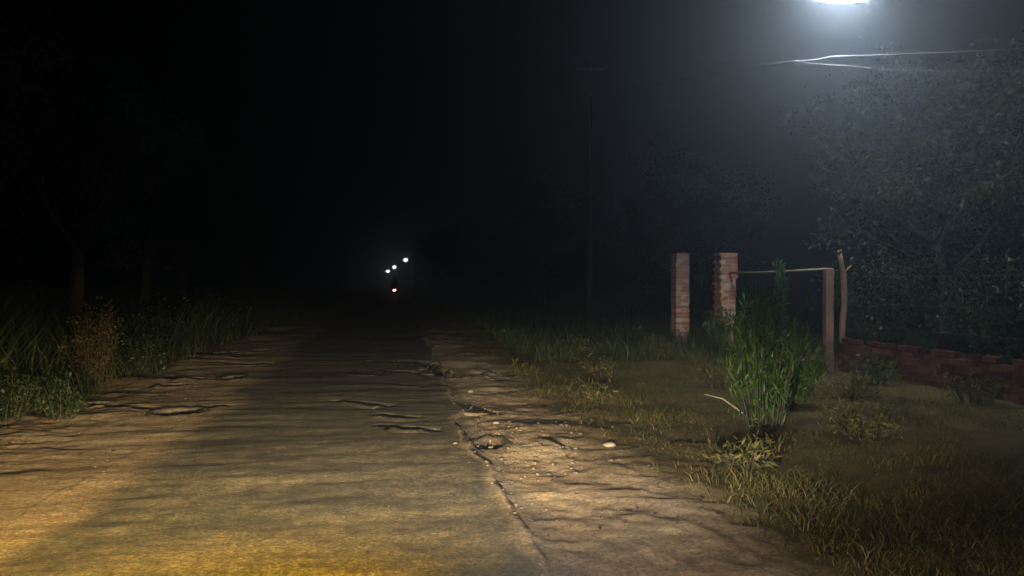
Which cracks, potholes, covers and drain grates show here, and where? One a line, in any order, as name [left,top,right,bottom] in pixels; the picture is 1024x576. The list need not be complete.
pothole [462,435,513,453]
pothole [145,406,211,419]
crack [83,349,280,413]
pothole [215,374,250,382]
